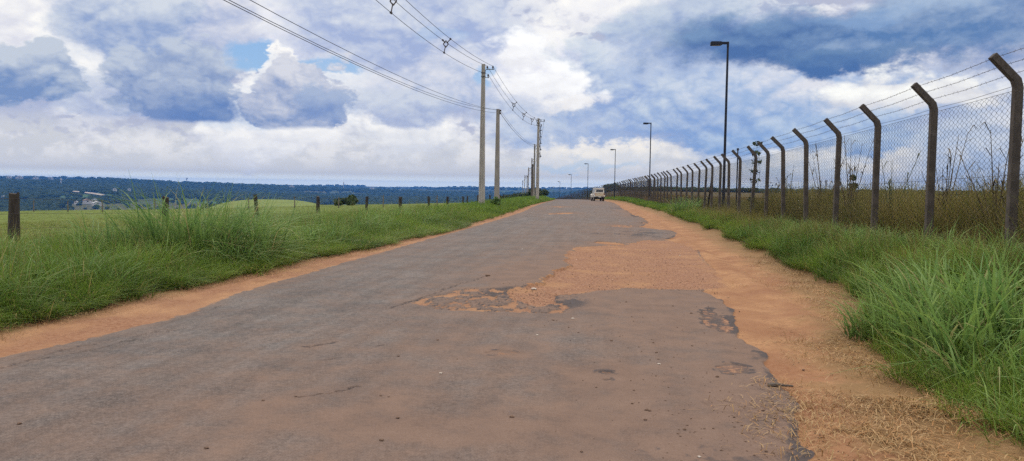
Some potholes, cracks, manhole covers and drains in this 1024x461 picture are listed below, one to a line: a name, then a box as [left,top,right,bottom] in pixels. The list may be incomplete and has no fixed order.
pothole [698,308,735,334]
crack [300,341,345,360]
pothole [715,362,750,374]
crack [388,276,572,314]
pothole [505,284,559,307]
crack [296,385,361,398]
